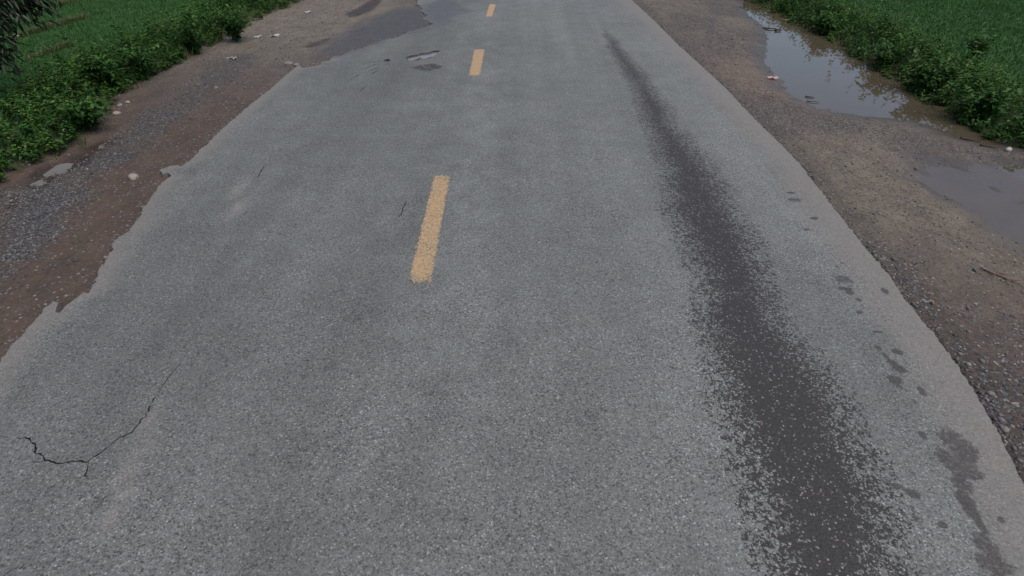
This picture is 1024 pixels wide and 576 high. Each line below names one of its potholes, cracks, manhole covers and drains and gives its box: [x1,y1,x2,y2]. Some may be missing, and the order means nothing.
crack [16,363,181,508]
pothole [405,50,439,61]
